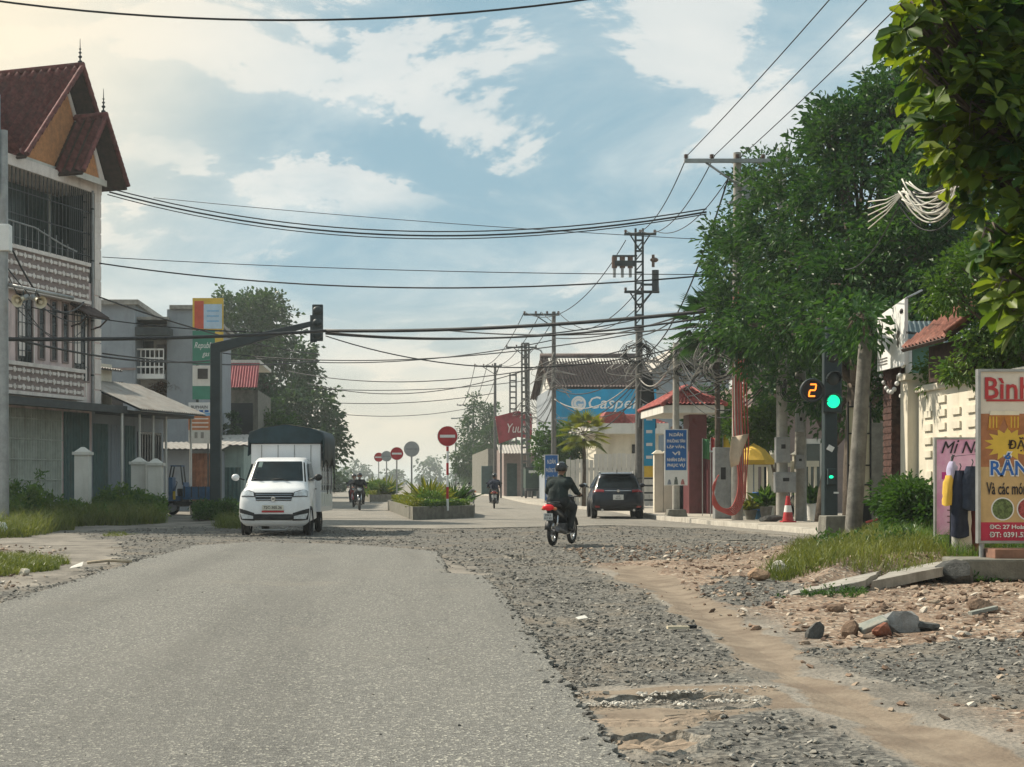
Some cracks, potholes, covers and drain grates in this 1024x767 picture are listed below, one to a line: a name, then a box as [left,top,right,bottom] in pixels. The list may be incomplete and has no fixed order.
pothole [605,730,717,756]
pothole [579,691,773,710]
